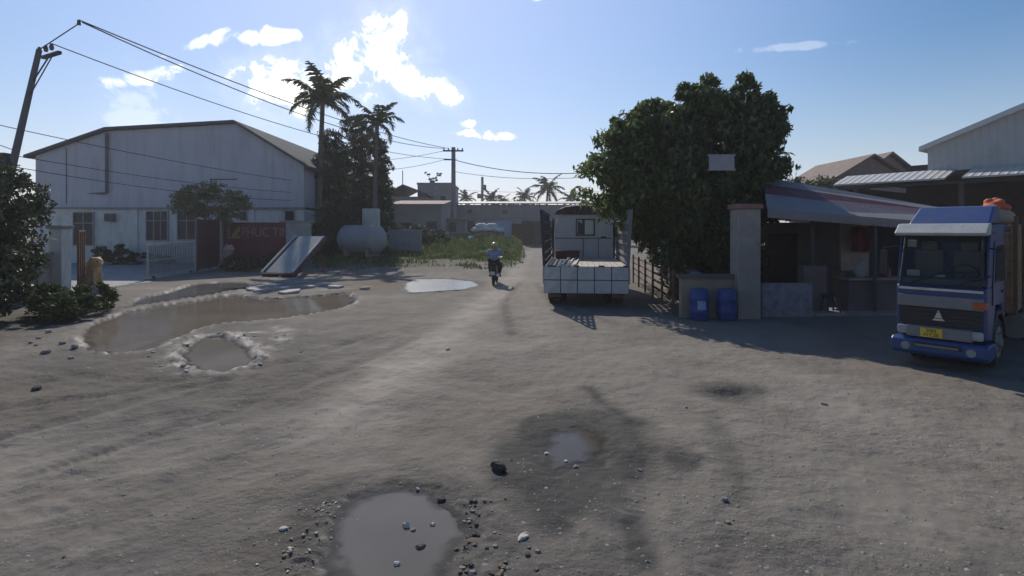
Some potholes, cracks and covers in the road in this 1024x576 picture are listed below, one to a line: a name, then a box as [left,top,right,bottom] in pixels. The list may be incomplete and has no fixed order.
pothole [70,292,363,356]
pothole [303,476,495,576]
pothole [170,331,269,374]
pothole [699,384,760,399]
pothole [123,281,265,308]
pothole [397,278,484,293]
pothole [513,424,623,482]
